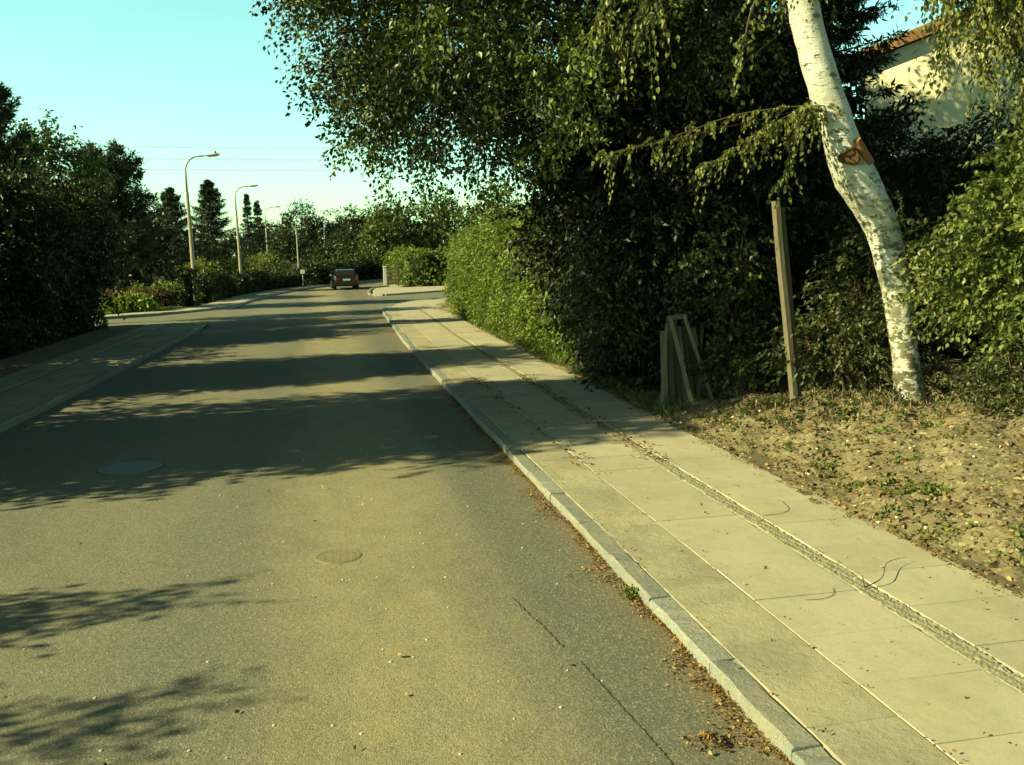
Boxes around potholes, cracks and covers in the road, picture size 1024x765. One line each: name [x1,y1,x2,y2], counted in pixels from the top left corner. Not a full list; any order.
crack [512,597,673,765]
manhole cover [95,460,166,476]
manhole cover [315,549,362,564]
